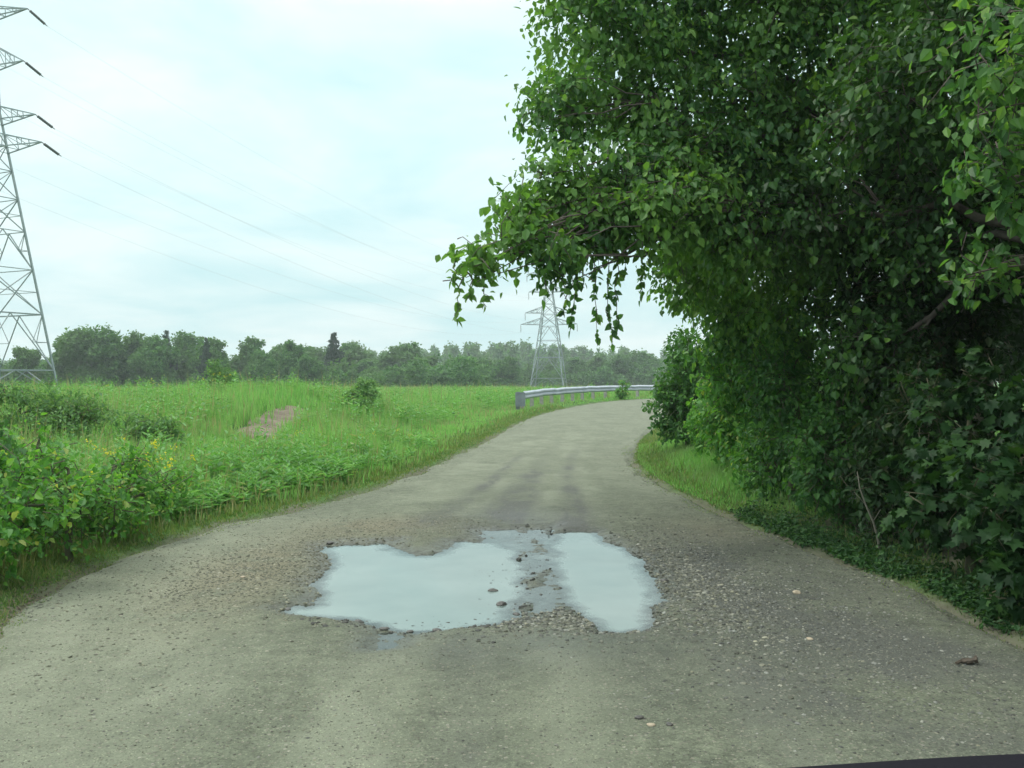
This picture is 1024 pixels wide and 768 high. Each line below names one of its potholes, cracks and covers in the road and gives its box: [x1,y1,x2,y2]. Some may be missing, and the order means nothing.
pothole [248,520,696,653]
